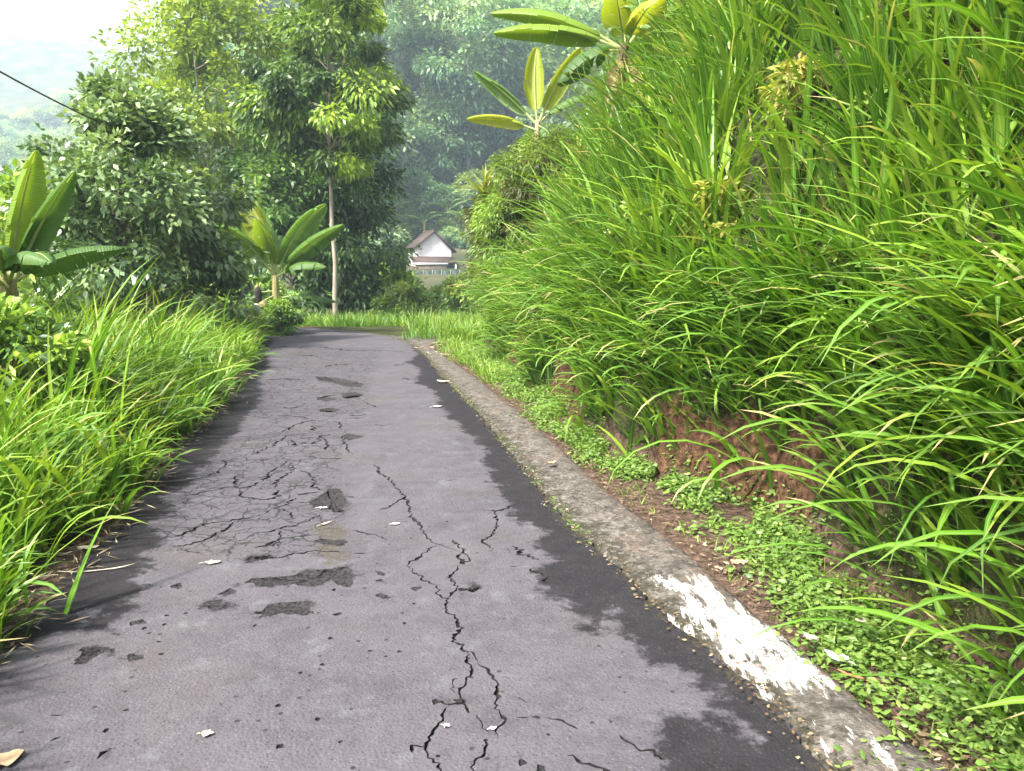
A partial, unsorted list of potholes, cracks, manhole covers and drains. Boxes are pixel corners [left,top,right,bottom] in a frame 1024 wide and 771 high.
pothole [309,488,348,512]
pothole [244,566,354,588]
crack [567,735,661,771]
pothole [74,645,115,664]
pothole [315,377,363,387]
crack [375,466,548,771]
crack [174,395,385,560]
pothole [201,599,234,610]
pothole [255,601,314,618]
